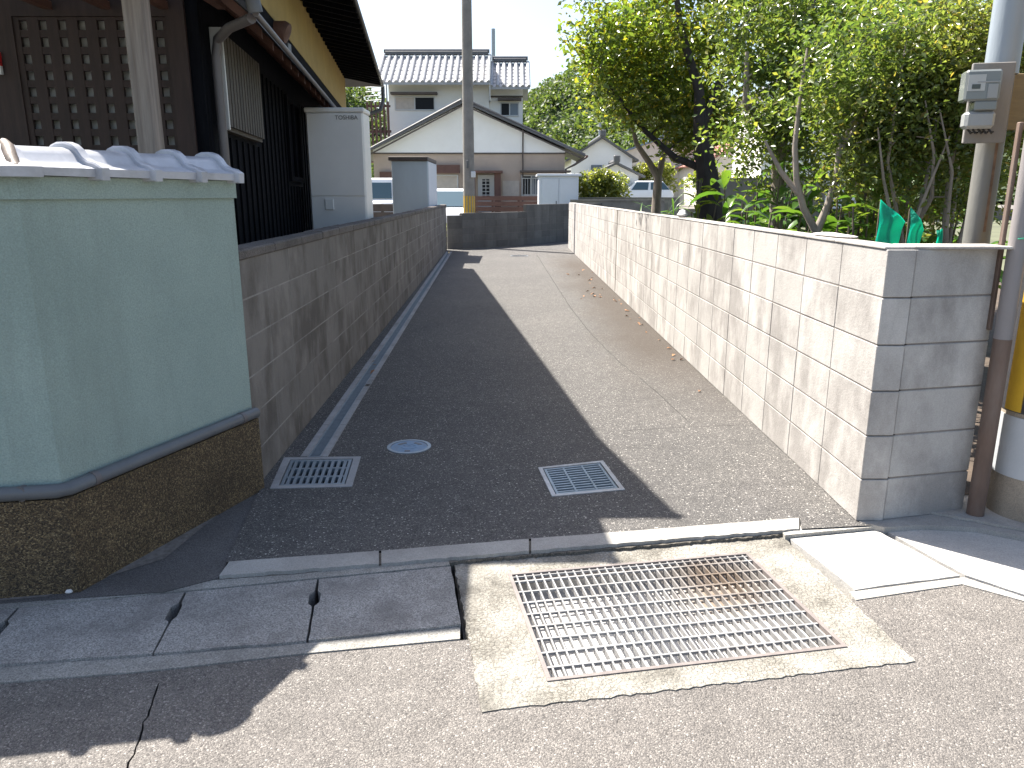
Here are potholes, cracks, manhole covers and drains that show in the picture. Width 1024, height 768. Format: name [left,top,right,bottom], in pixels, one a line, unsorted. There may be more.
manhole cover [387,439,431,454]
drain grate [270,456,361,489]
drain grate [538,460,625,497]
drain grate [508,552,848,682]
crack [126,683,159,768]
